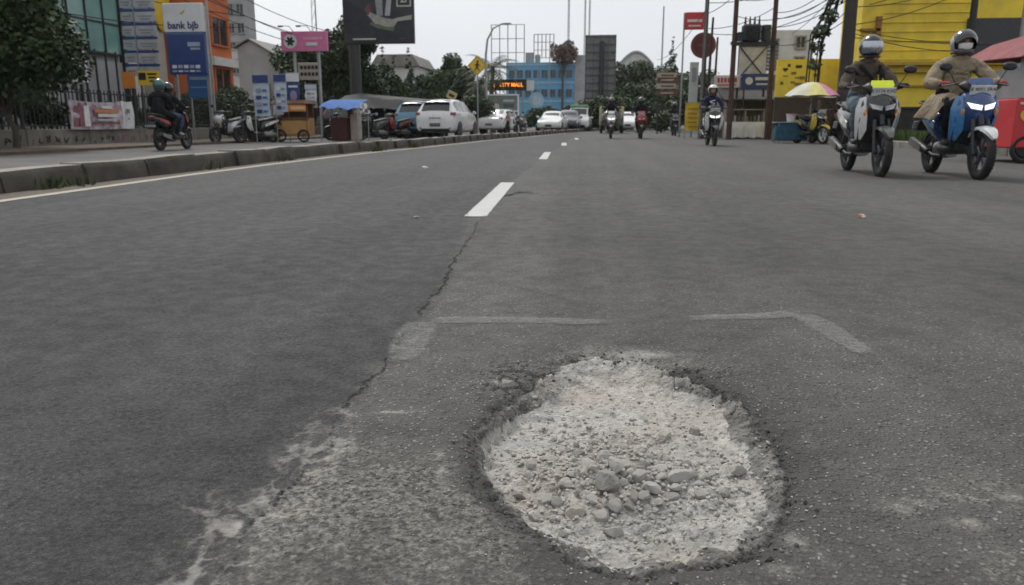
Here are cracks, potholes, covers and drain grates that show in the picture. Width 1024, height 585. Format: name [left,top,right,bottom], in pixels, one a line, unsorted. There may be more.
crack [208,217,484,585]
pothole [459,354,806,583]
